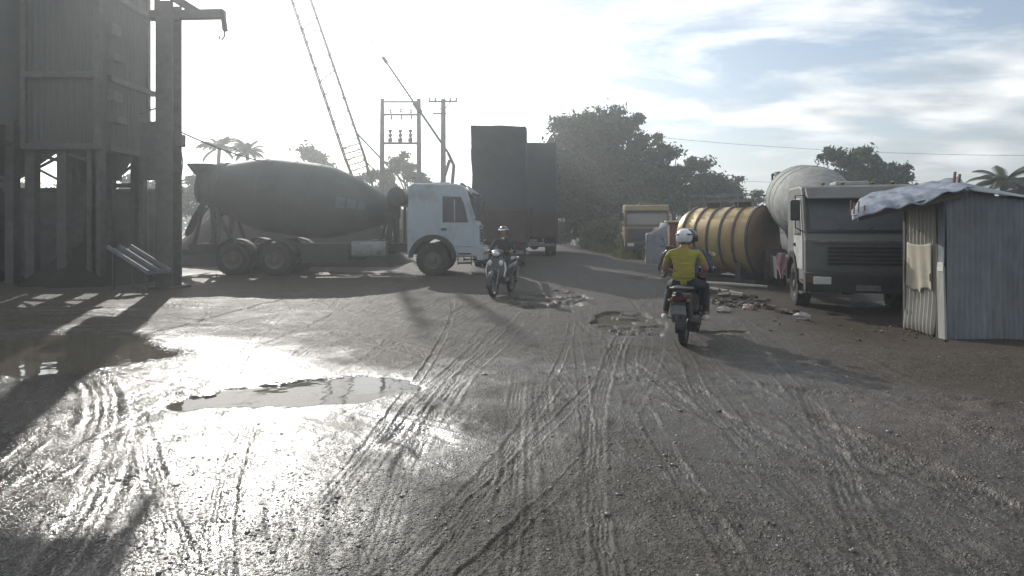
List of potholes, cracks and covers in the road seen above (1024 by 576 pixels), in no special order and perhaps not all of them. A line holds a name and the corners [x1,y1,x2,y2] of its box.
pothole [0,328,208,380]
pothole [586,309,670,341]
pothole [137,371,452,413]
pothole [497,289,595,310]
